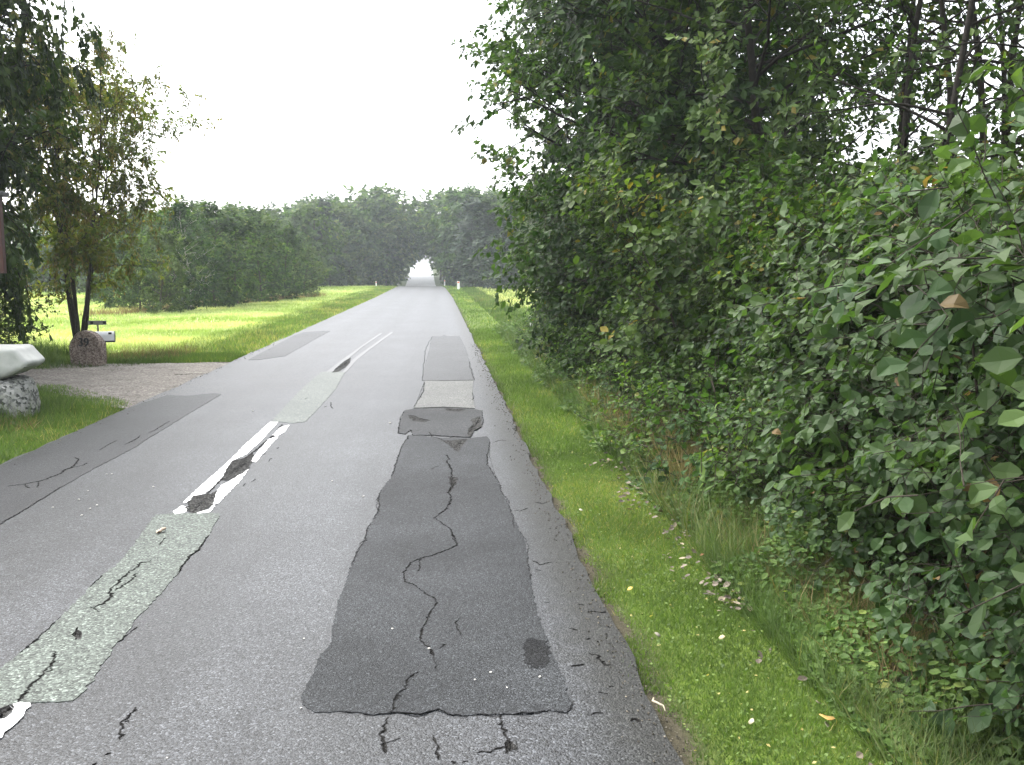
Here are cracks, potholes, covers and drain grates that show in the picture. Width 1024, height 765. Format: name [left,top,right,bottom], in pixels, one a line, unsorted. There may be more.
crack [90,538,165,612]
crack [571,604,611,667]
crack [432,715,510,764]
crack [92,708,138,765]
pothole [222,454,254,480]
pothole [185,490,217,513]
crack [378,432,461,754]
crack [17,616,61,703]
crack [178,537,207,572]
crack [10,421,169,488]
